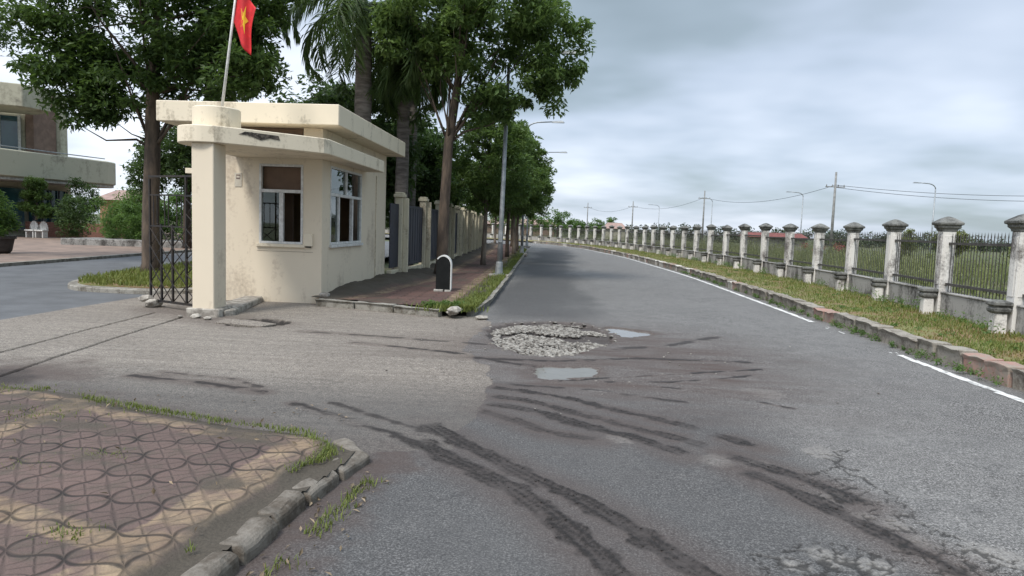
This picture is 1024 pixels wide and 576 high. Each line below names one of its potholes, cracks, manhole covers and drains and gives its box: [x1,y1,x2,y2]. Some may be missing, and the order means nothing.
pothole [521,364,605,383]
crack [749,449,1024,576]
pothole [479,321,618,357]
pothole [602,327,658,337]
